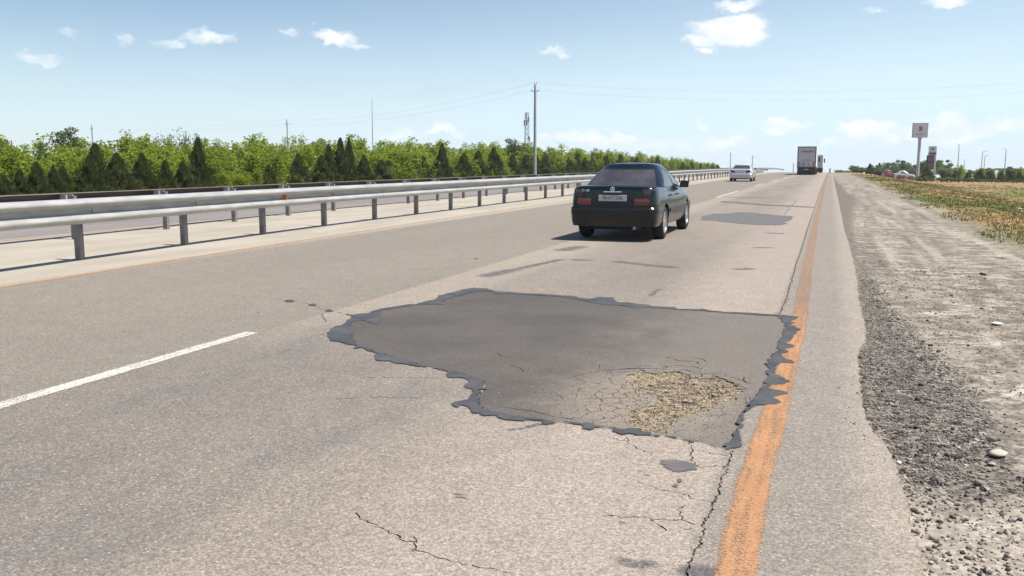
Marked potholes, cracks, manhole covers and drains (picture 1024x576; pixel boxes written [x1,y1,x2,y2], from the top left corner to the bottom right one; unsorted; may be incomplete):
crack [497,353,751,441]
crack [605,481,714,531]
crack [687,441,726,468]
pothole [624,370,743,433]
crack [353,508,515,576]
